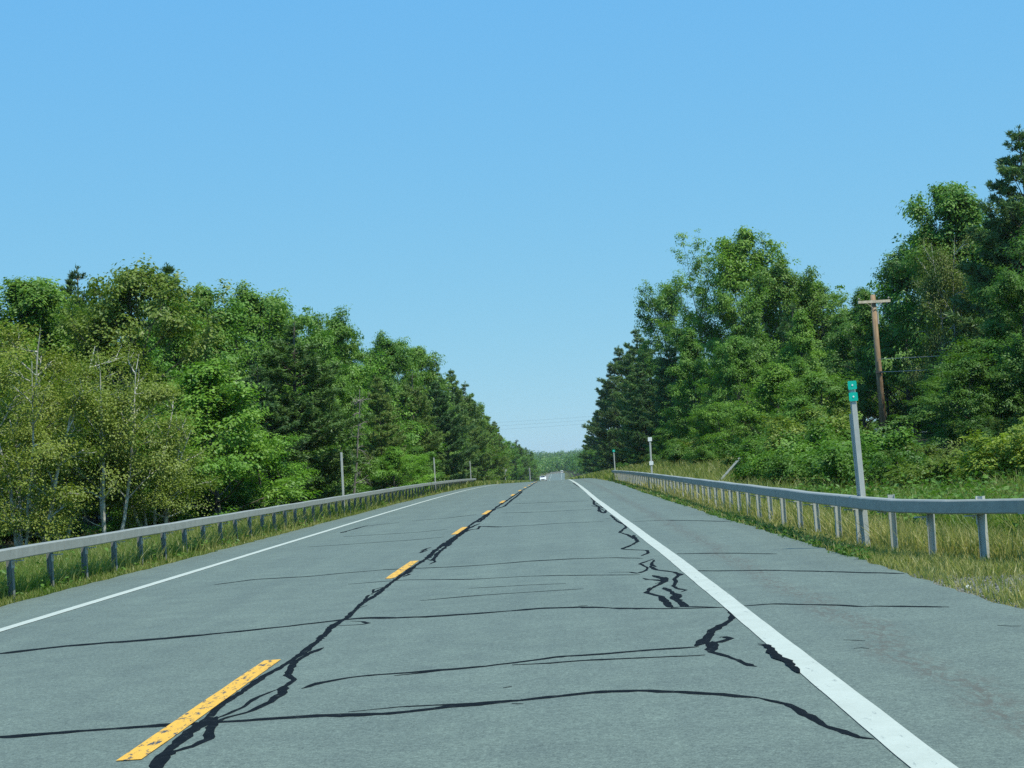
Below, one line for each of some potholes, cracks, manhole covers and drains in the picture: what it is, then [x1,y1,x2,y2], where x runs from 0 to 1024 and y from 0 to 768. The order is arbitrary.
crack [313,501,603,547]
crack [215,557,640,601]
crack [677,553,904,574]
